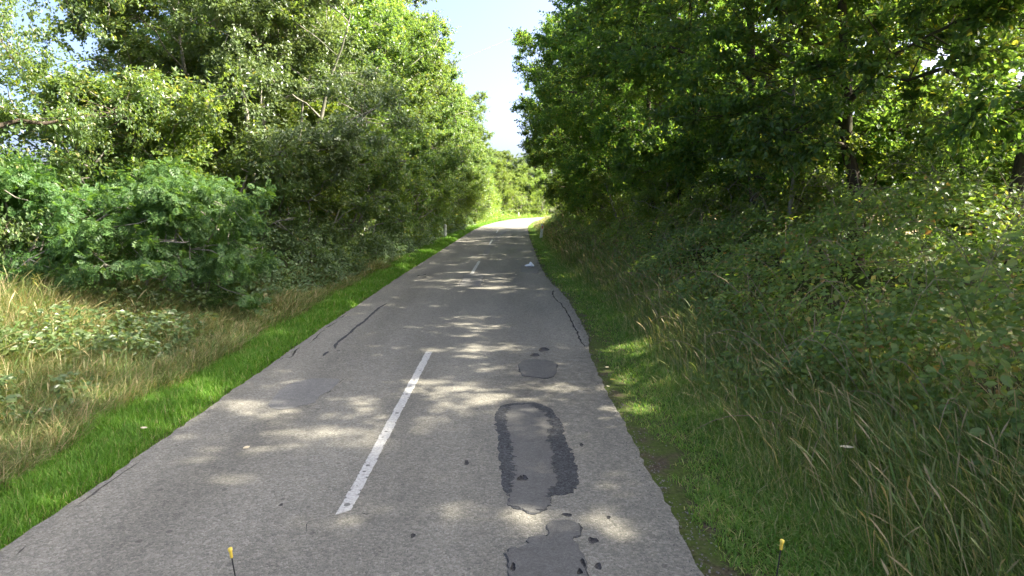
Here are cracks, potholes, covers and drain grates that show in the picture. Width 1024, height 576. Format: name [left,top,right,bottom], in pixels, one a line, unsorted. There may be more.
crack [552,291,585,347]
